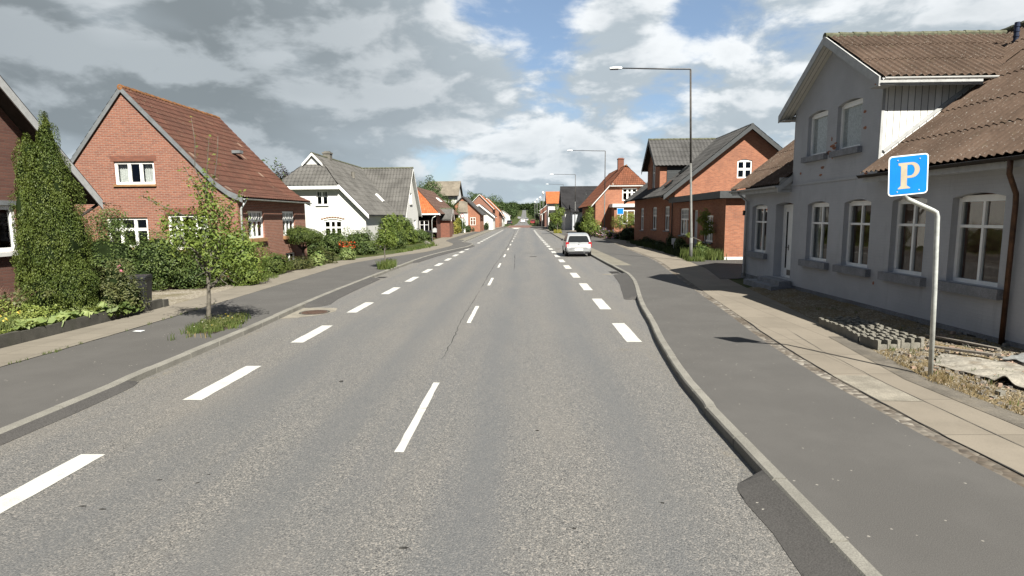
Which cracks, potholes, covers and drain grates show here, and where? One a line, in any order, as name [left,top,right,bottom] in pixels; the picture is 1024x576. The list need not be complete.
crack [444,252,515,356]
